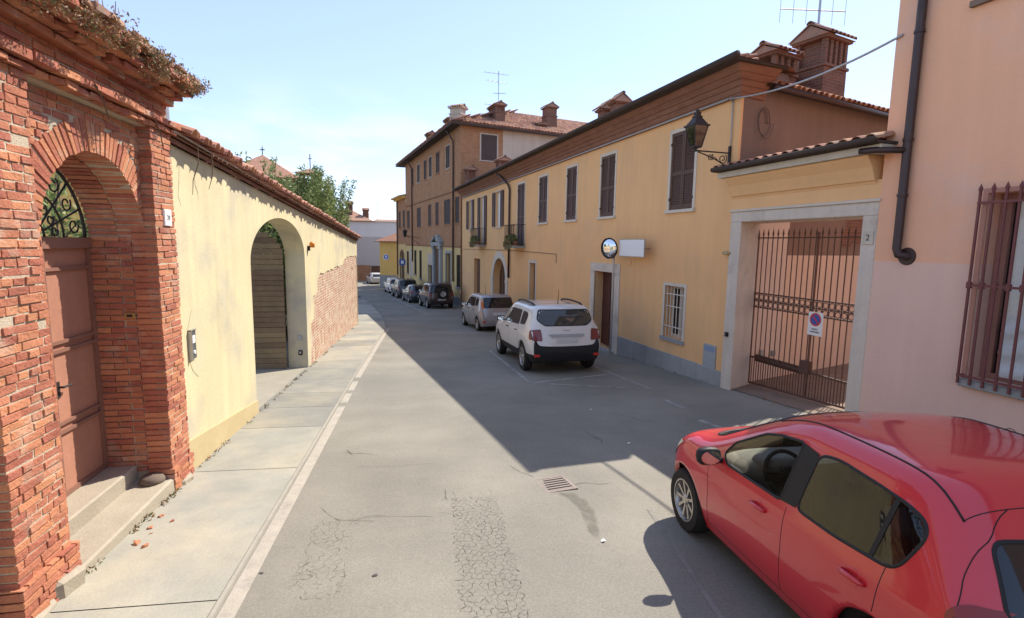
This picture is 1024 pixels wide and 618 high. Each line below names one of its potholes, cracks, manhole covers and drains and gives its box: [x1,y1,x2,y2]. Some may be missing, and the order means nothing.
crack [442,491,529,618]
crack [286,507,379,599]
drain grate [537,475,578,493]
